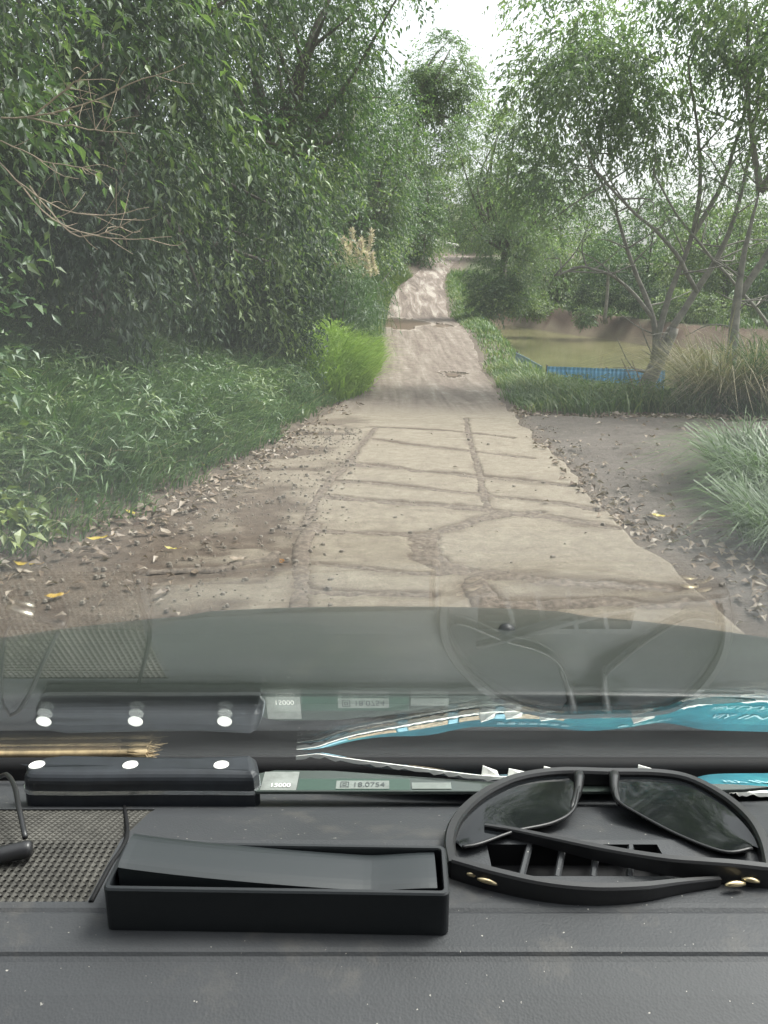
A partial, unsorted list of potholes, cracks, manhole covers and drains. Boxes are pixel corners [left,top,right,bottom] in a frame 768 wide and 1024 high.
pothole [437,370,471,378]
pothole [385,315,436,331]
crack [147,418,697,611]
